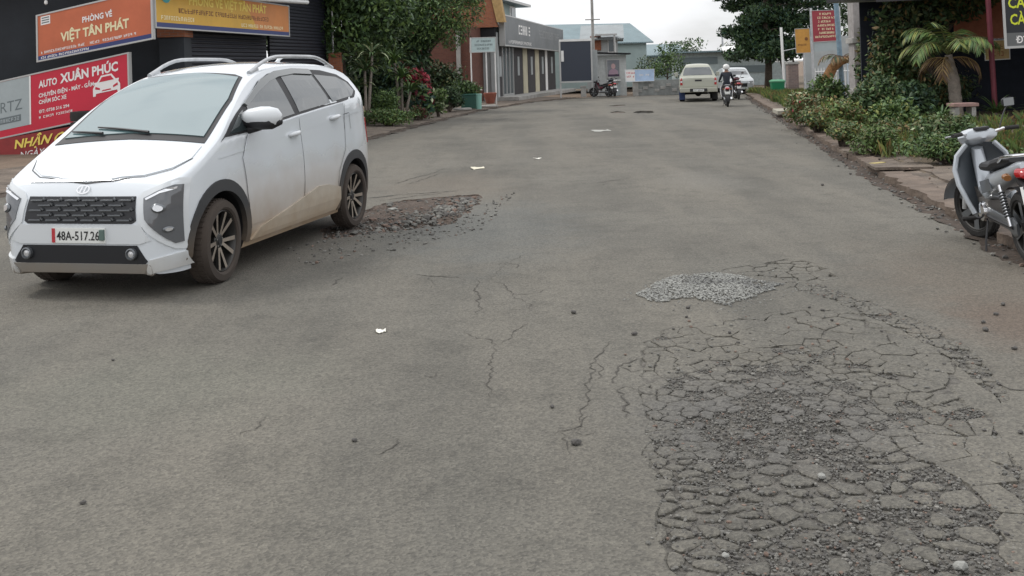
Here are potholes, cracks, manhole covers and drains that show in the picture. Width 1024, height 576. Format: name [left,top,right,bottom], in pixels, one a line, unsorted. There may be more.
crack [467,324,526,395]
crack [418,252,544,312]
crack [553,258,1024,576]
pothole [319,194,482,240]
